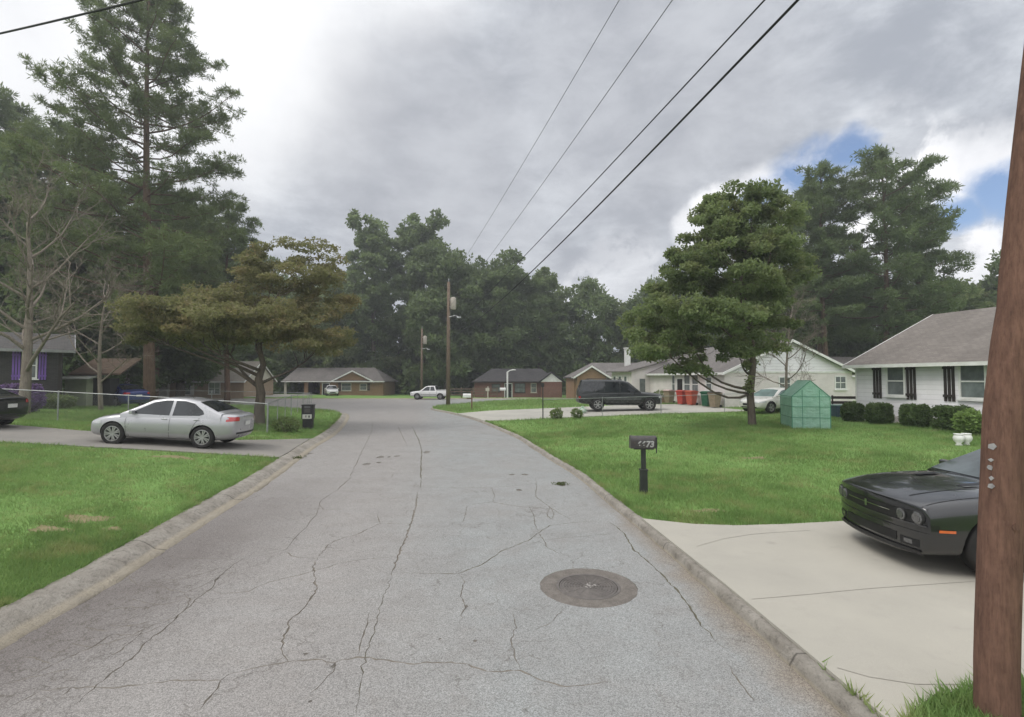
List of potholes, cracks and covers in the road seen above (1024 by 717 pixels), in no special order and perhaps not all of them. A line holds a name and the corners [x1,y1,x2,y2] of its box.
crack [5,424,724,710]
manhole cover [540,568,638,608]
